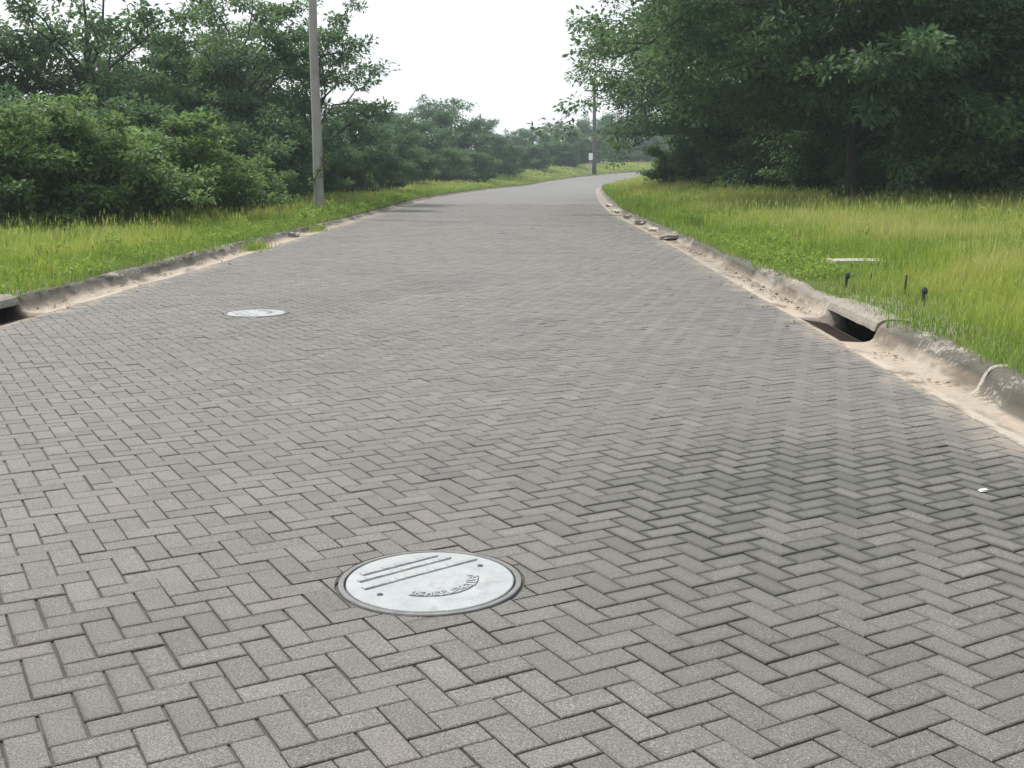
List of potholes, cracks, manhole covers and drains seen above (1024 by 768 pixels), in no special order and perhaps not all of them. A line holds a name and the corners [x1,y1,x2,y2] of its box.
manhole cover [335,550,524,617]
manhole cover [223,309,289,317]
drain grate [795,295,974,342]
